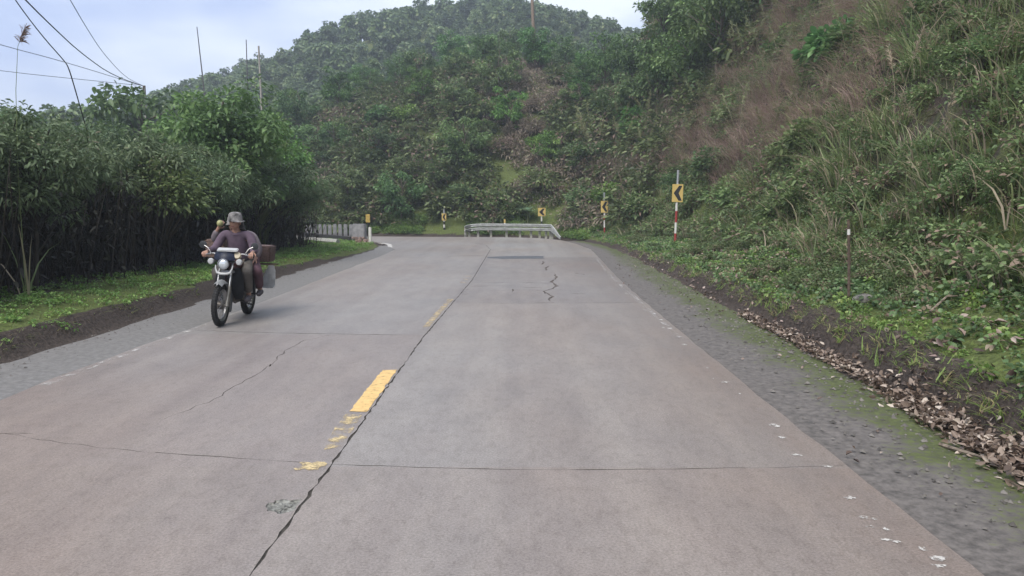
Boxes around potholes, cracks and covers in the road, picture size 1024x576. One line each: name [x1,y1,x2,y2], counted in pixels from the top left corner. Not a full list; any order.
crack [531,261,574,303]
